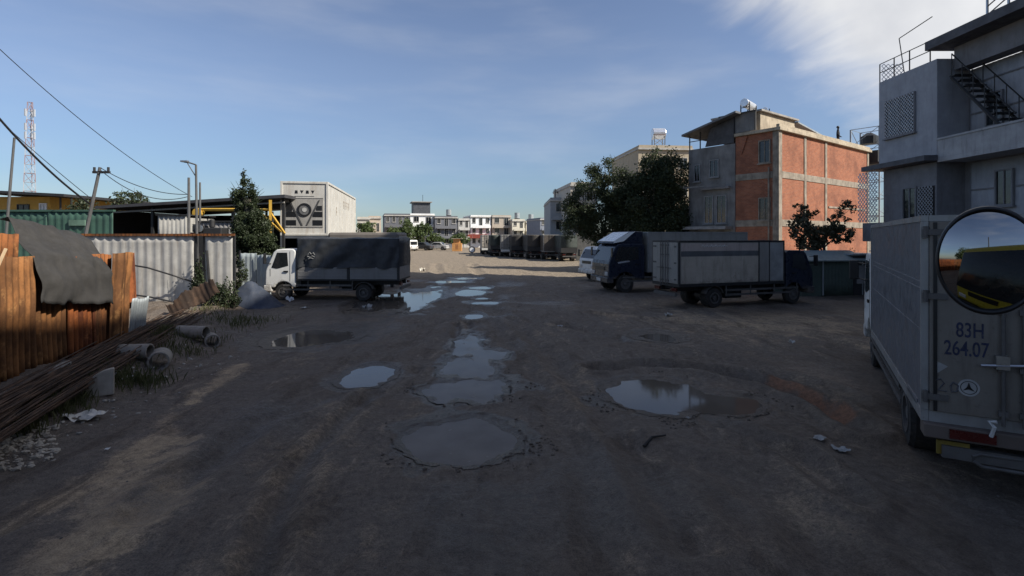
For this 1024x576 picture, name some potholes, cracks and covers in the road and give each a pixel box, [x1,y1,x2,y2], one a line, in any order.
pothole [412,332,514,405]
pothole [450,286,493,297]
pothole [340,288,445,316]
pothole [256,325,369,351]
pothole [330,361,401,390]
pothole [598,375,777,419]
pothole [626,329,690,343]
pothole [461,312,486,320]
pothole [391,412,526,469]
